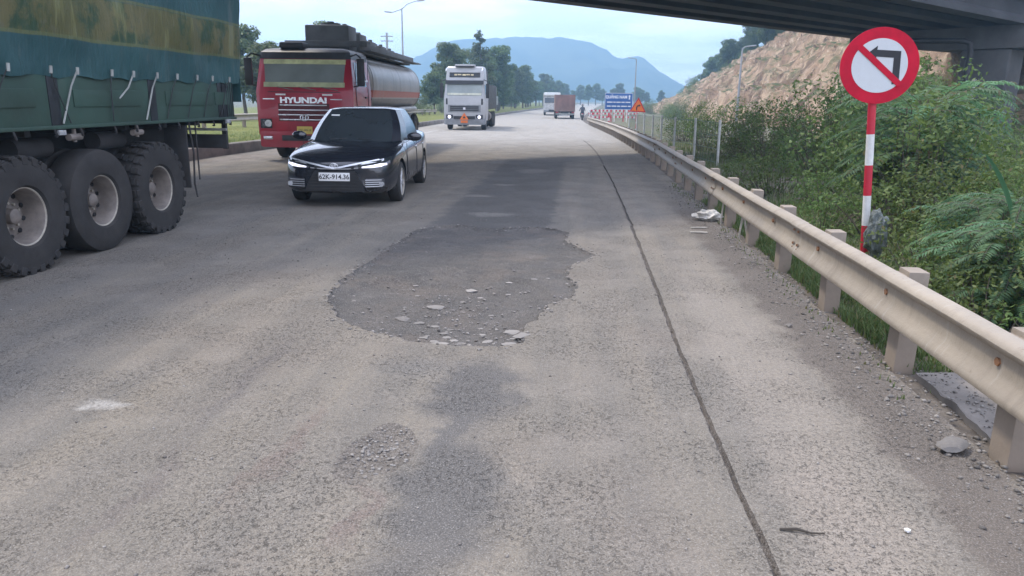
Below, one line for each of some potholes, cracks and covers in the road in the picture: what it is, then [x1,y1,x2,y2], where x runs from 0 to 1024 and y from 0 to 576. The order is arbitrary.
pothole [333,423,421,485]
